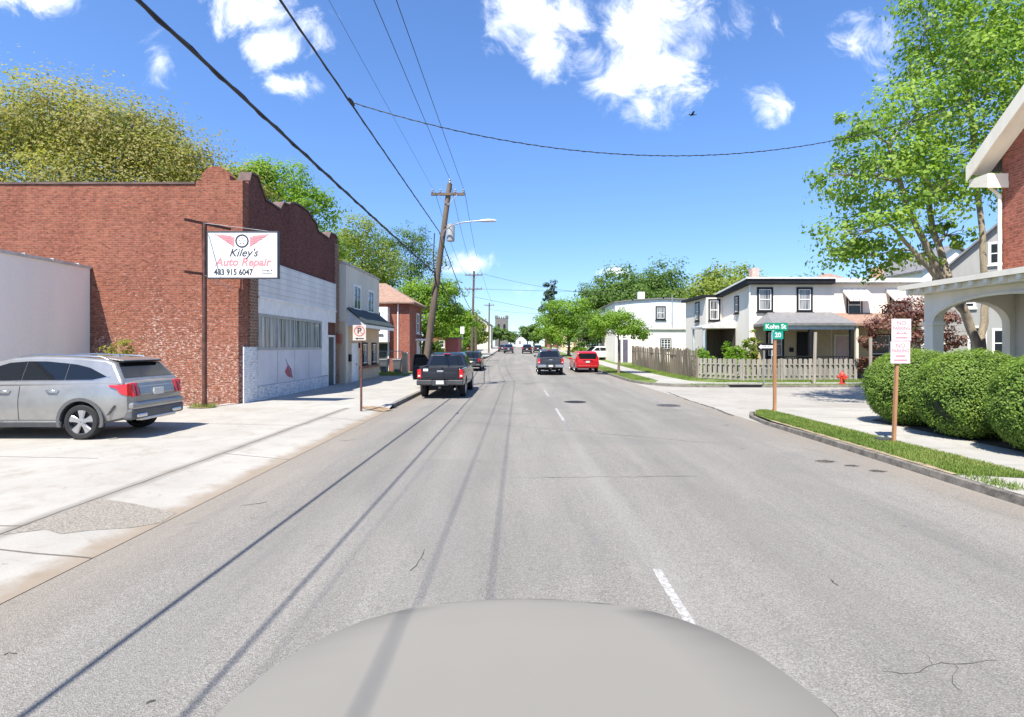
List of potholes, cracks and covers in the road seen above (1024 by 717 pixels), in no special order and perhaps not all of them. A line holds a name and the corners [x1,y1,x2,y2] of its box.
crack [889,653,987,689]
